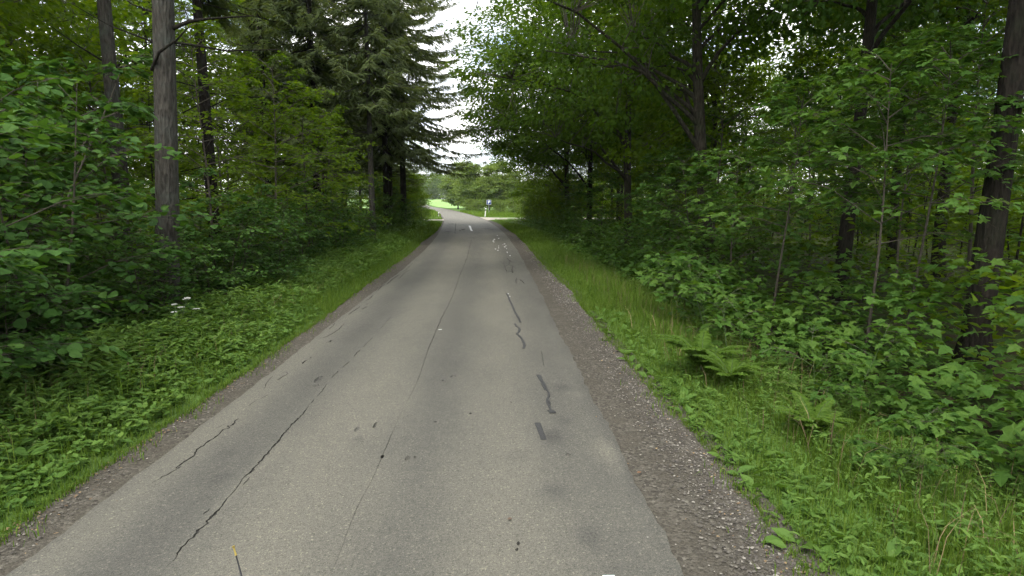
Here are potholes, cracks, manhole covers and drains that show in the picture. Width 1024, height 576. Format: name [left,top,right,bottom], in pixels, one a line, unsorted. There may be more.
crack [152,266,410,483]
crack [164,317,391,570]
